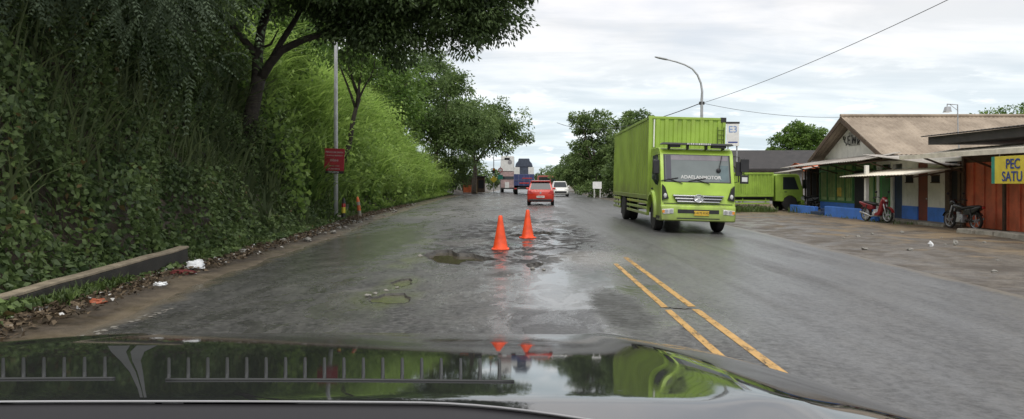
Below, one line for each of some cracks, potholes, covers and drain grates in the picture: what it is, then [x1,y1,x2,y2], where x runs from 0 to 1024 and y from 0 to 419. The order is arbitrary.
pothole [390,278,413,287]
pothole [424,249,498,264]
pothole [367,293,411,304]
